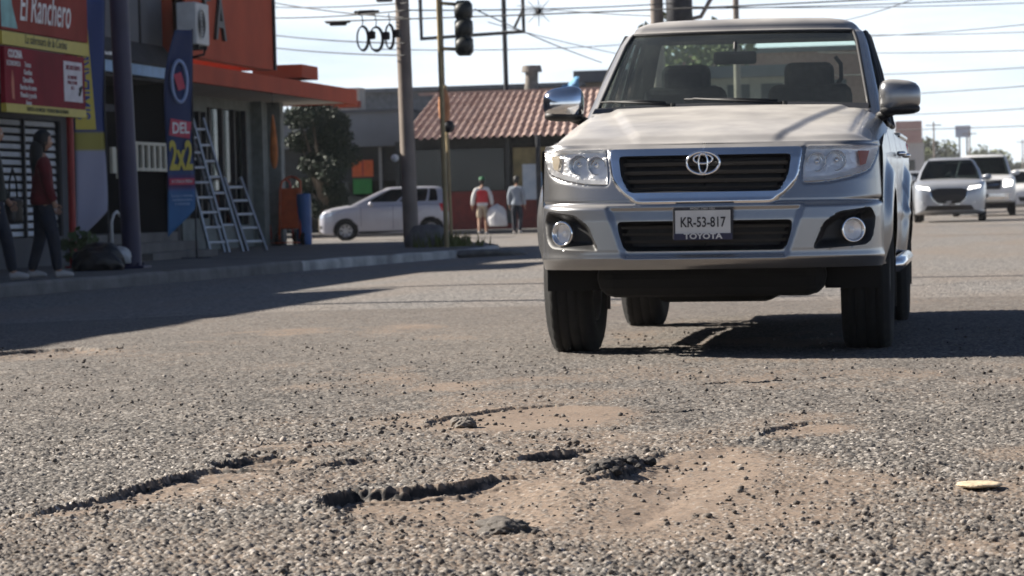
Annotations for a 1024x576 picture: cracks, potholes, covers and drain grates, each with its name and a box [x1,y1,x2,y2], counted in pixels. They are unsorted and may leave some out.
pothole [508,447,614,463]
pothole [27,453,337,519]
pothole [310,474,592,539]
pothole [578,445,789,535]
